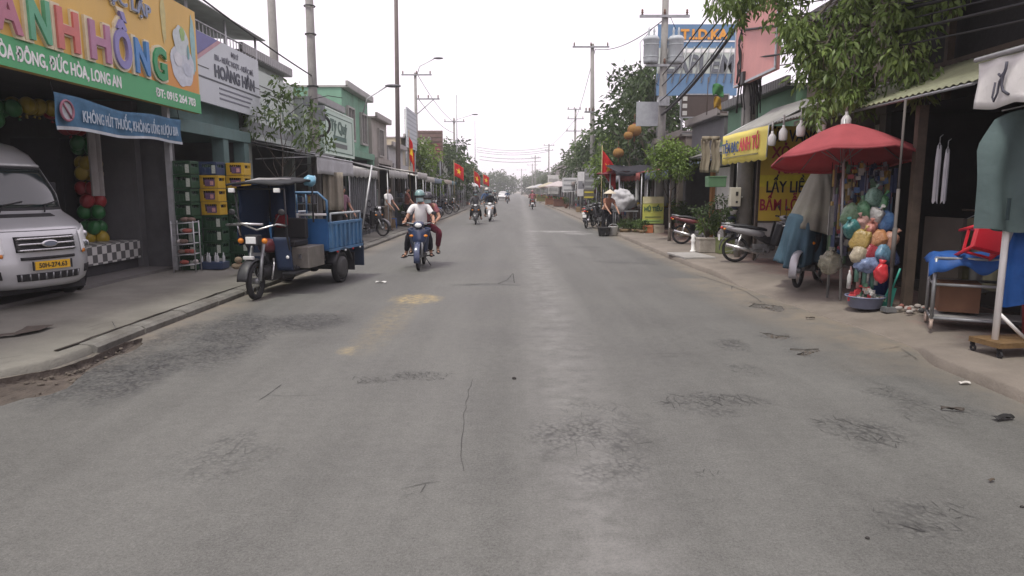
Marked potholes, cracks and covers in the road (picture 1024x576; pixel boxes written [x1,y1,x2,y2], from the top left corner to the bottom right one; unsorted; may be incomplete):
crack [353,372,472,470]
pothole [0,338,143,406]
